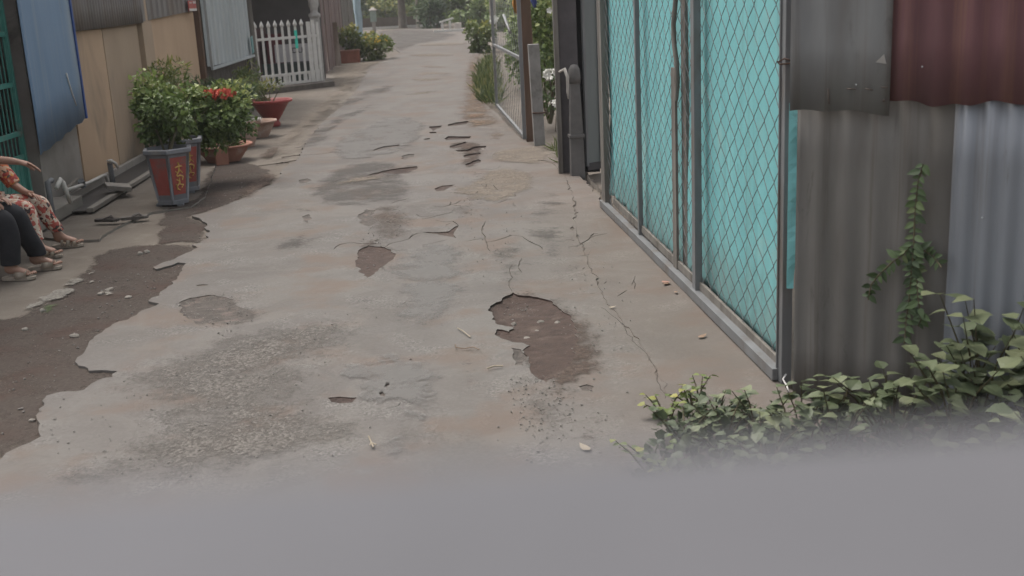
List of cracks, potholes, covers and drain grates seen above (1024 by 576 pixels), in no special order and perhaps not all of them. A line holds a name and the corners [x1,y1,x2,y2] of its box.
crack [591,278,666,398]
pothole [355,245,396,277]
pothole [488,293,578,383]
crack [334,169,543,291]
pothole [179,295,255,325]
